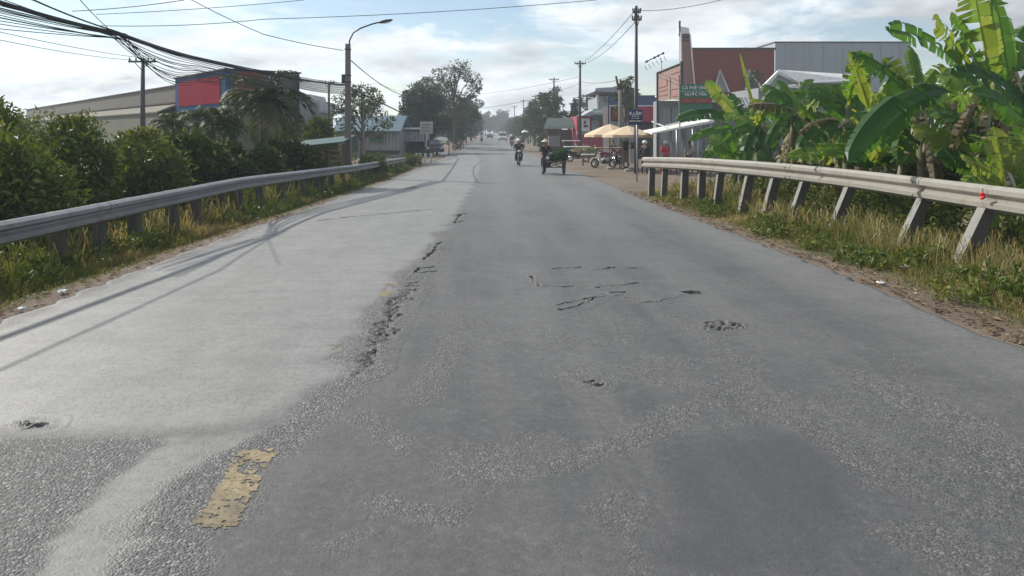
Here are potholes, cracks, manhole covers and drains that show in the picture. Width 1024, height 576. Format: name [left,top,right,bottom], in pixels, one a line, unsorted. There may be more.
crack [519,266,695,314]
crack [304,208,481,290]
pothole [0,412,73,439]
pothole [685,318,757,336]
